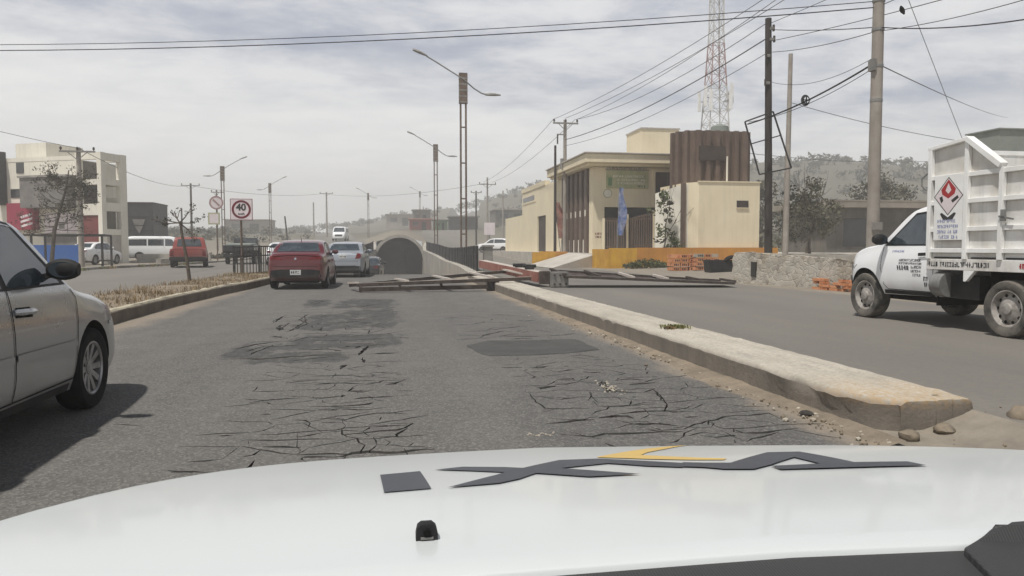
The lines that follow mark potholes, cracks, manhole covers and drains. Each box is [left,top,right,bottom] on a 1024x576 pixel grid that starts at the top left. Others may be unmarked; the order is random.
crack [238,299,409,368]
crack [445,308,838,447]
crack [167,357,435,473]
